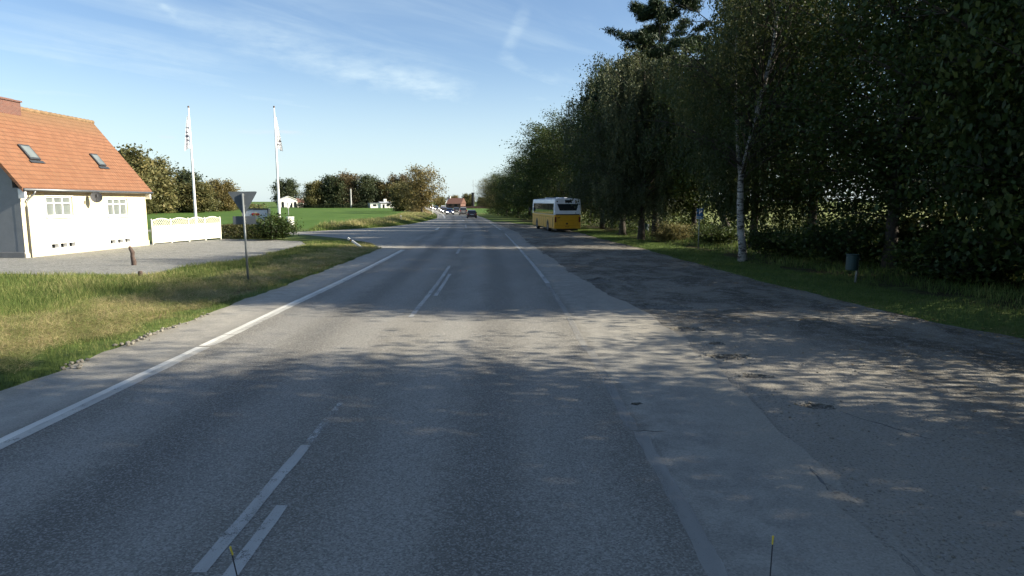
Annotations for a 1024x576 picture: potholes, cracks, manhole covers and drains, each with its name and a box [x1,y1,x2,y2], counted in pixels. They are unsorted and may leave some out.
pothole [799,401,837,410]
pothole [699,353,757,361]
crack [840,411,930,439]
